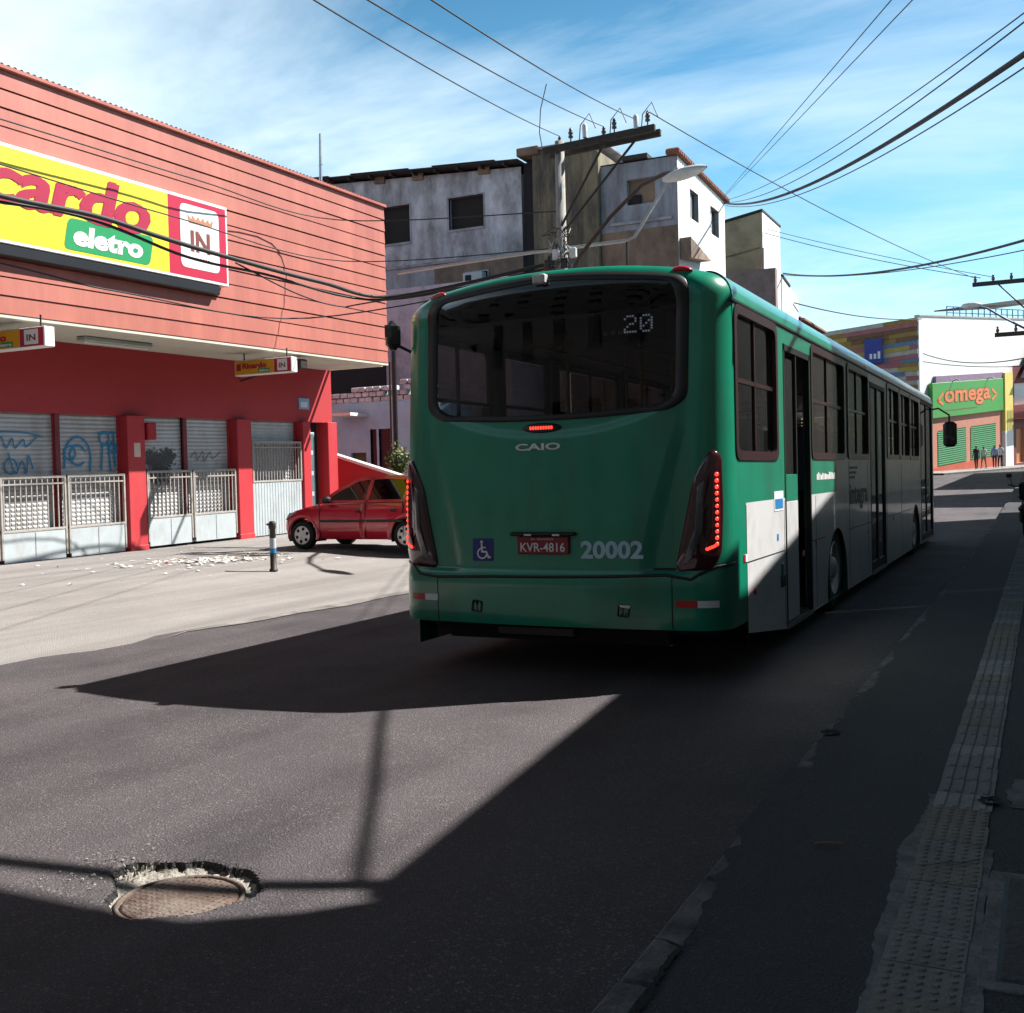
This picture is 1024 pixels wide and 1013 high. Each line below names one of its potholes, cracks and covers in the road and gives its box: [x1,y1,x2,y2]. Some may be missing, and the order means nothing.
manhole cover [113,875,246,920]
